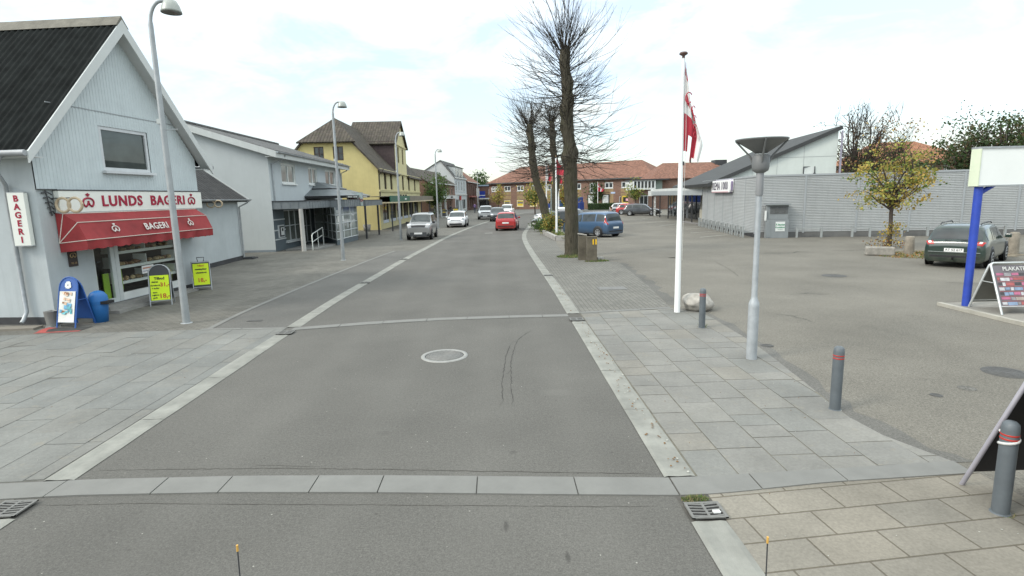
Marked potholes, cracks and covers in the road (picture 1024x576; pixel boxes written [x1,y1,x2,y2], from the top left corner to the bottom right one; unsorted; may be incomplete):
manhole cover [980,366,1024,379]
crack [499,335,524,407]
manhole cover [421,349,468,363]
drain grate [0,499,39,518]
drain grate [683,501,729,519]
